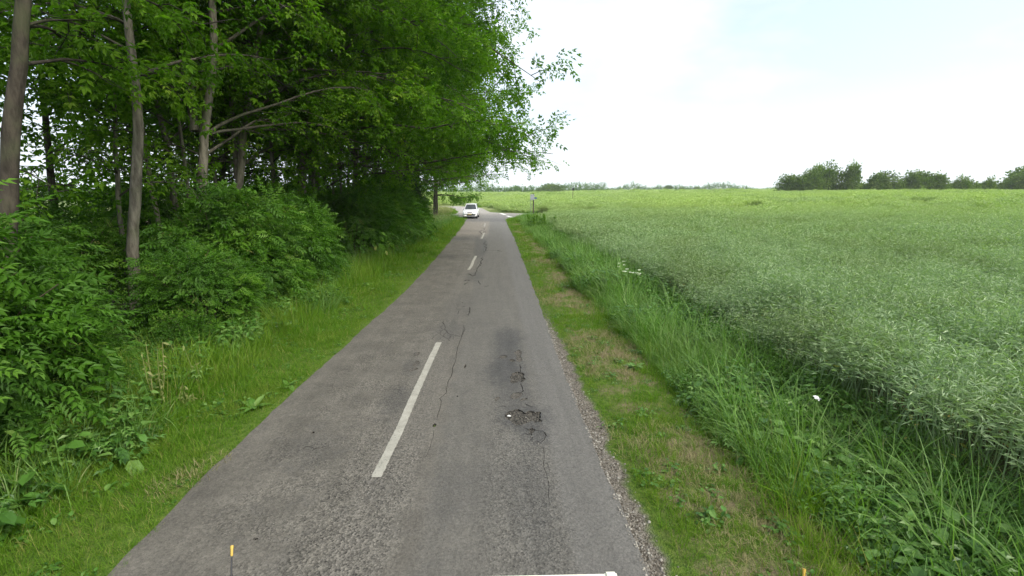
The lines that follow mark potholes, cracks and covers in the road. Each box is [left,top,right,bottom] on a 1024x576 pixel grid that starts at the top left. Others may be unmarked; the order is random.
pothole [505,409,542,426]
crack [432,302,470,418]
pothole [510,372,525,383]
